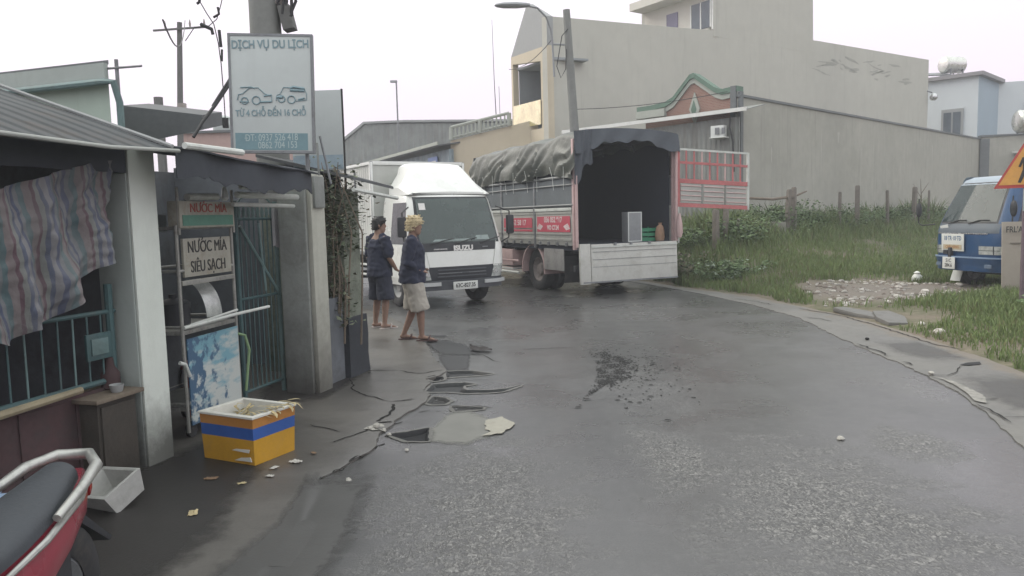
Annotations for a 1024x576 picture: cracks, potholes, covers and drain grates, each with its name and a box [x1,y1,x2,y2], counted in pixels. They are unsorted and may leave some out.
pothole [389,427,434,443]
crack [349,379,430,424]
pothole [424,382,523,394]
crack [976,398,1024,422]
pothole [425,396,454,406]
